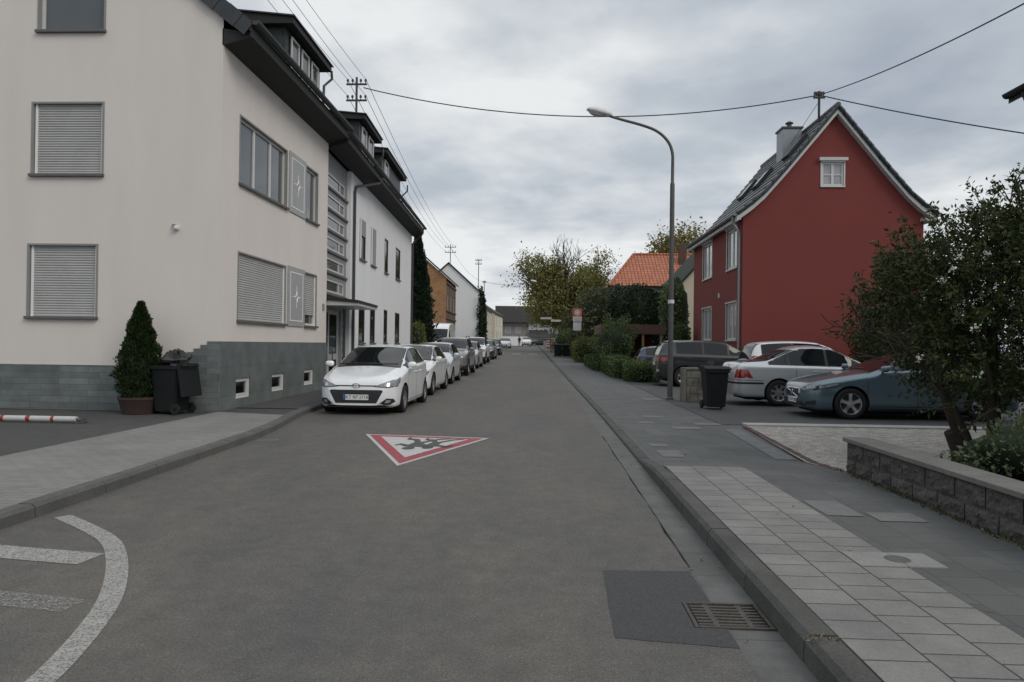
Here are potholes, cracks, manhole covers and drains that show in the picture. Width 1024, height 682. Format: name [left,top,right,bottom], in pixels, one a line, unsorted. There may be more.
drain grate [682,601,776,631]
